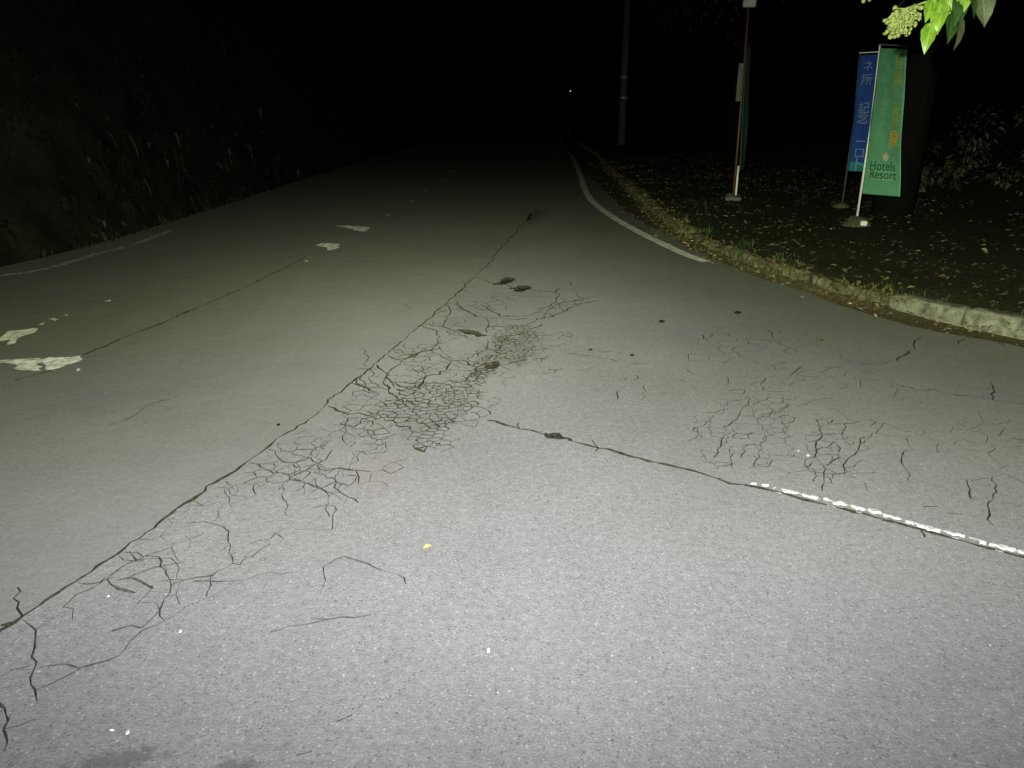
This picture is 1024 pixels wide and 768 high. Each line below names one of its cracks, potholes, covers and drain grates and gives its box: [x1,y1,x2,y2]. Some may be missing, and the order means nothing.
pothole [544,433,572,442]
crack [0,225,1024,752]
